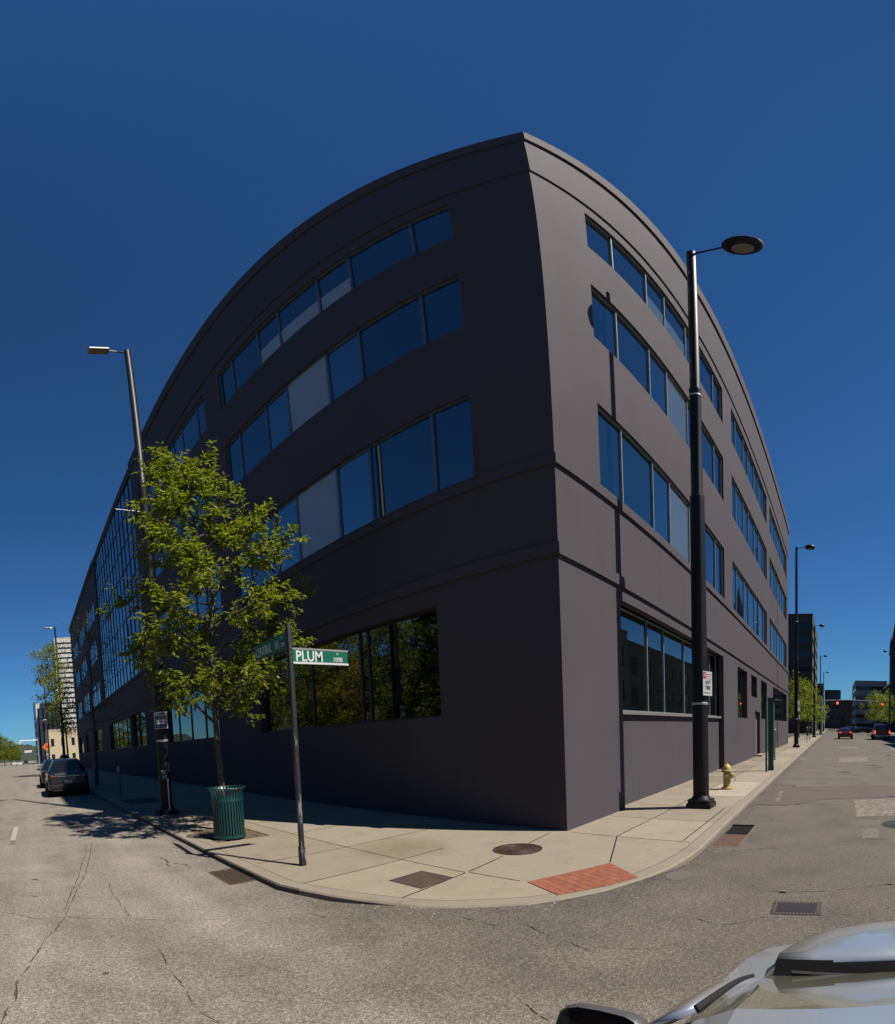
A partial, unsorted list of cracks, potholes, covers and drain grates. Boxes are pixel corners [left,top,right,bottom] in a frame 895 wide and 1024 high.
drain grate [208,868,258,885]
crack [158,948,219,1024]
drain grate [709,824,756,847]
manhole cover [493,843,543,855]
utility cover [389,871,454,891]
